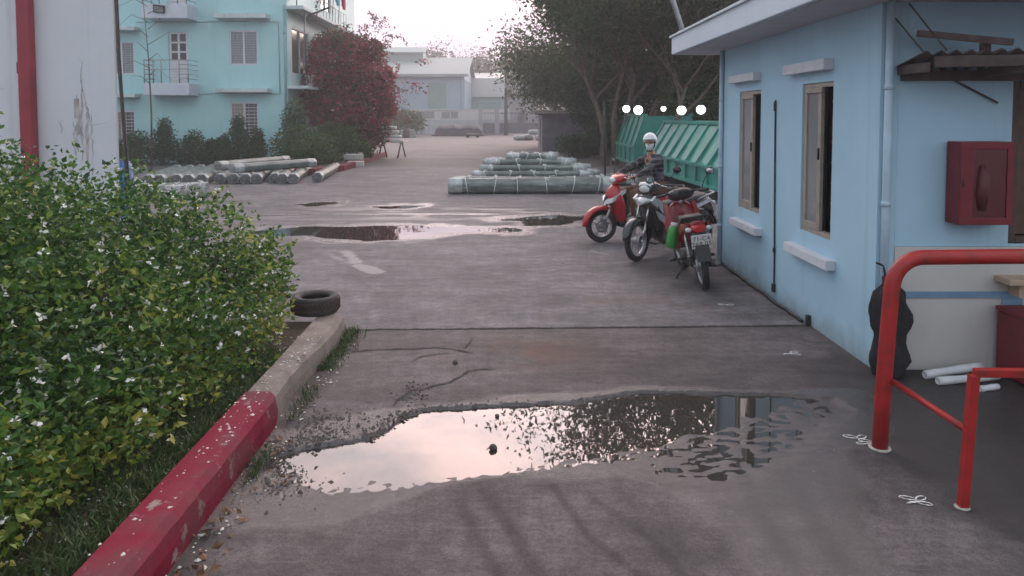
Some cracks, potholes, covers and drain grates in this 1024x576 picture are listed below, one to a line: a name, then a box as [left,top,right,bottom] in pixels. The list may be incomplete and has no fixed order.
pothole [255,390,859,516]
crack [316,337,496,406]
